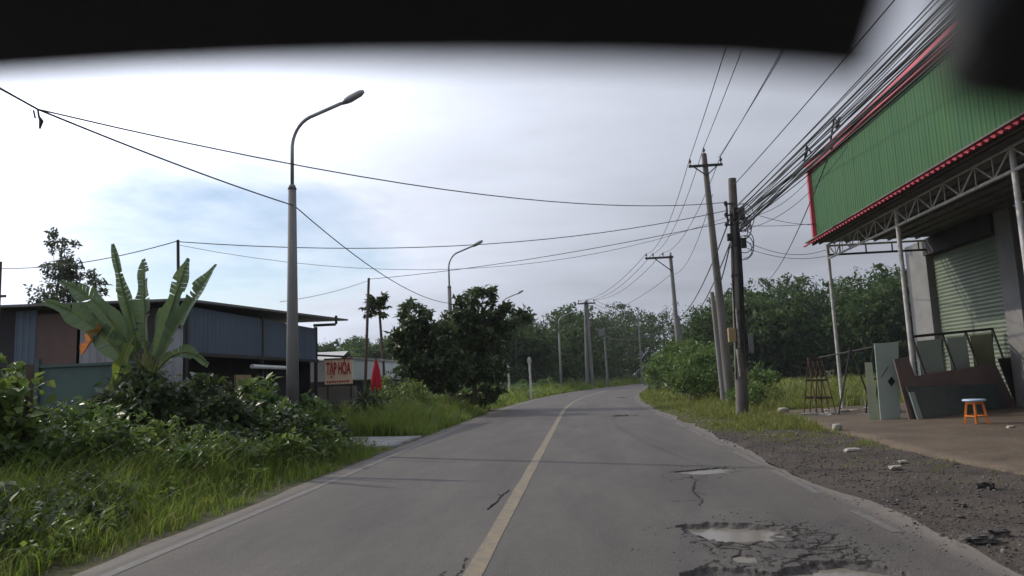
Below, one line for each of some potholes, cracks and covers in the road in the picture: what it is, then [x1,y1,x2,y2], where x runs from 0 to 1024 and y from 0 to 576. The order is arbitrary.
pothole [676,521,795,543]
crack [684,521,886,576]
crack [487,490,510,510]
crack [665,476,705,507]
crack [440,558,470,576]
pothole [675,467,737,475]
